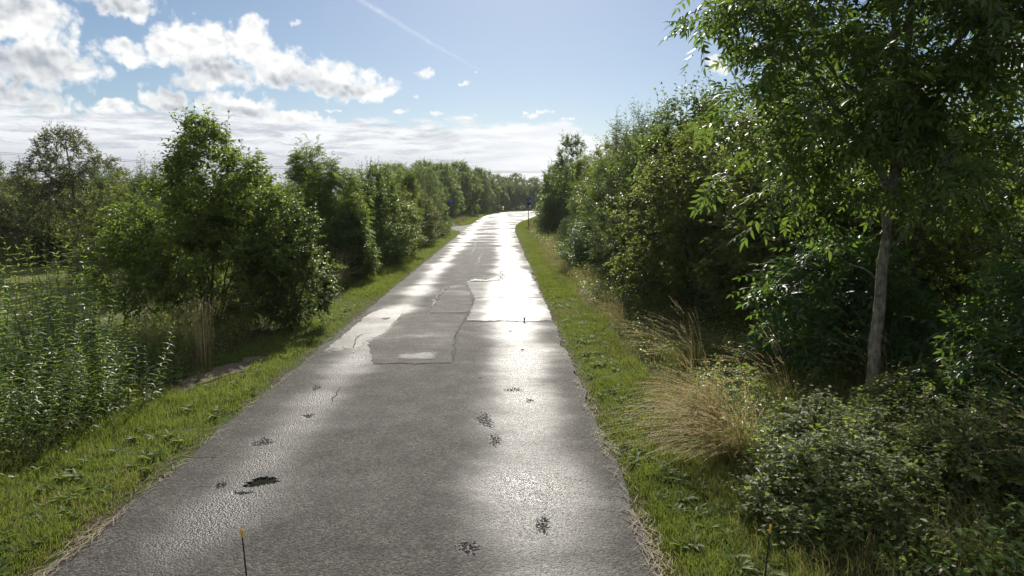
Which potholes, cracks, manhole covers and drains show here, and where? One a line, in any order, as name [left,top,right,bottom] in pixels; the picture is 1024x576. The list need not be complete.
pothole [533,512,552,537]
pothole [247,437,277,447]
pothole [471,409,496,431]
pothole [242,476,281,487]
pothole [487,432,503,448]
pothole [452,539,484,559]
